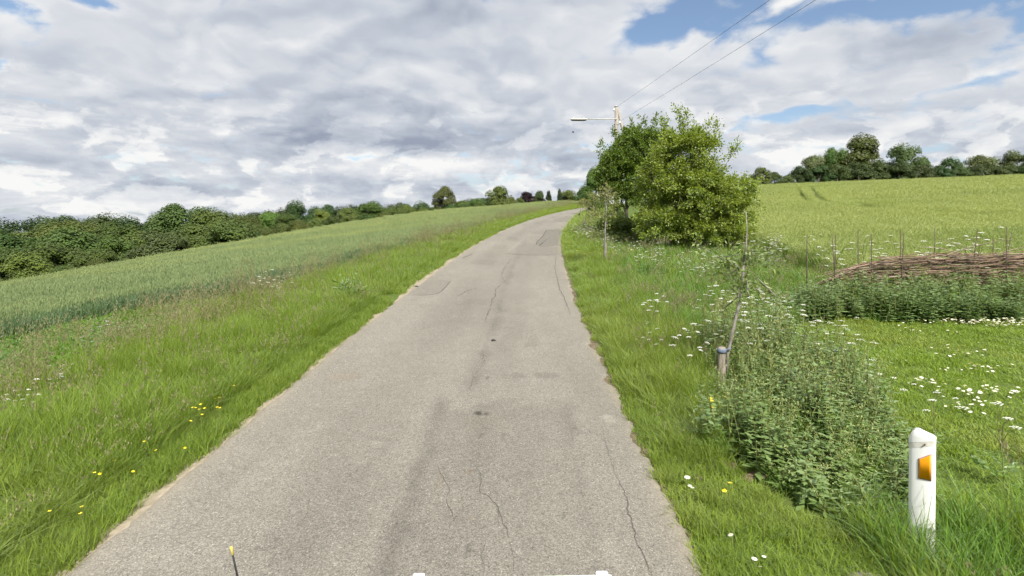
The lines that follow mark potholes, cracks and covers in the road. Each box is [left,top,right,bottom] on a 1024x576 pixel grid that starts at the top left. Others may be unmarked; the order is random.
crack [603,430,649,568]
crack [474,464,515,574]
crack [507,231,571,315]
